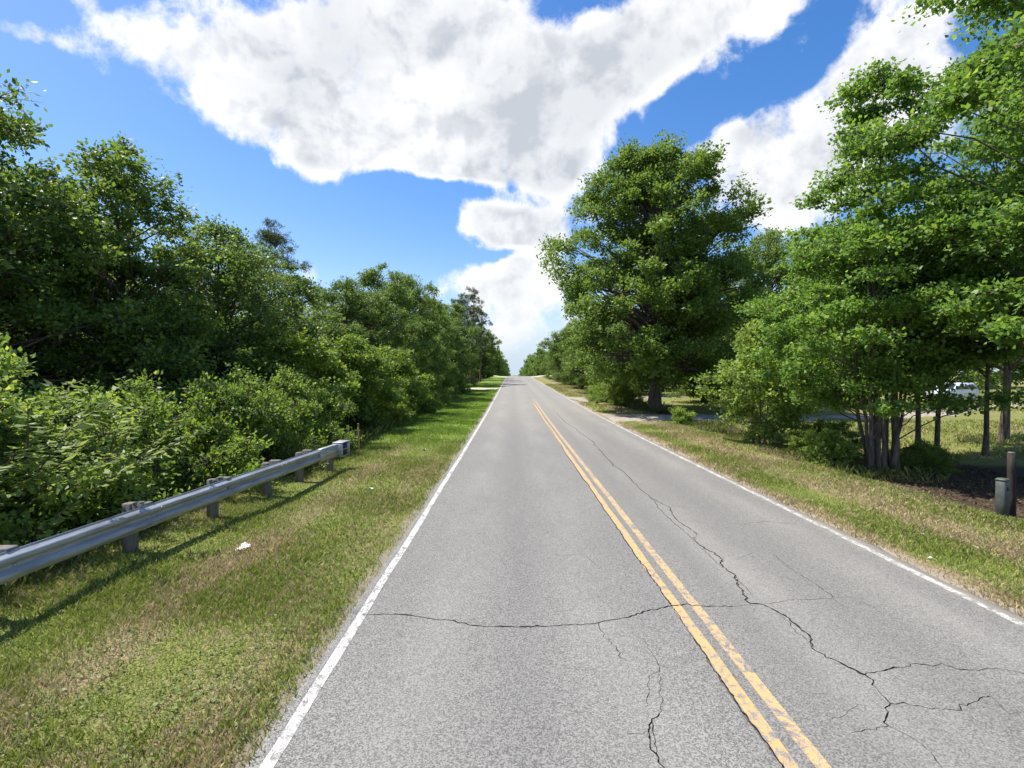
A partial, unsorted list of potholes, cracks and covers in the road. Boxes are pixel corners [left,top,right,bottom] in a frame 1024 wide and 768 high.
crack [369,410,1024,766]
